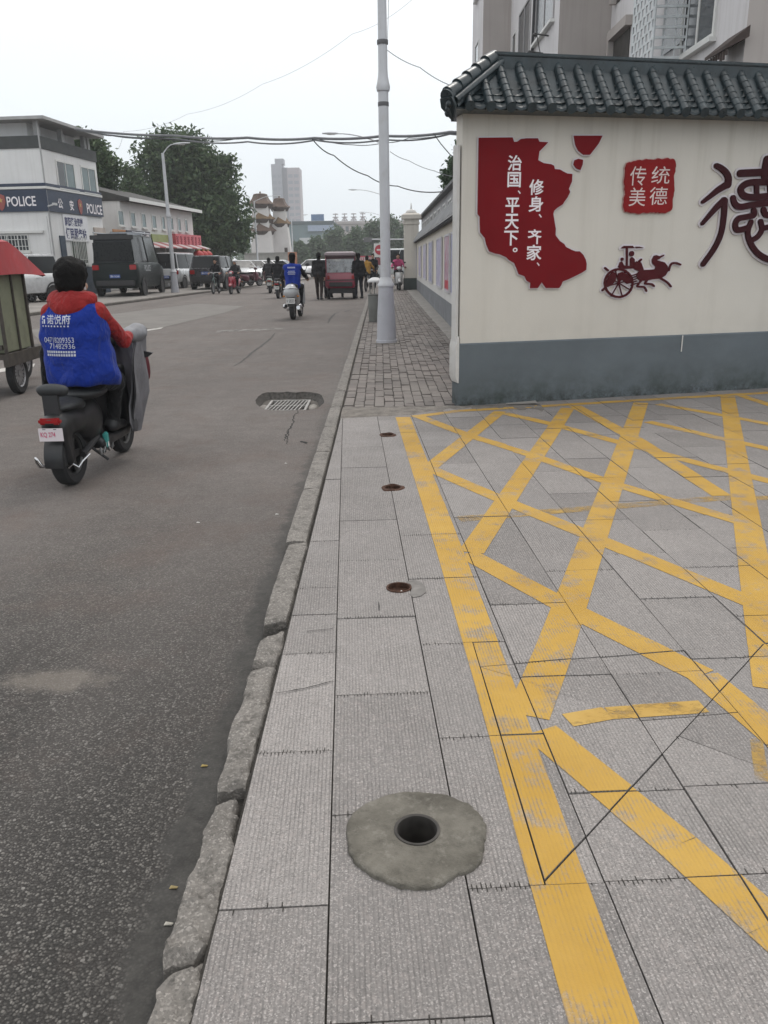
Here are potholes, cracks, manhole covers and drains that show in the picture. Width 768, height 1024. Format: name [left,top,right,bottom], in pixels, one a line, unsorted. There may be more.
drain grate [260,400,318,411]
crack [284,413,308,444]
